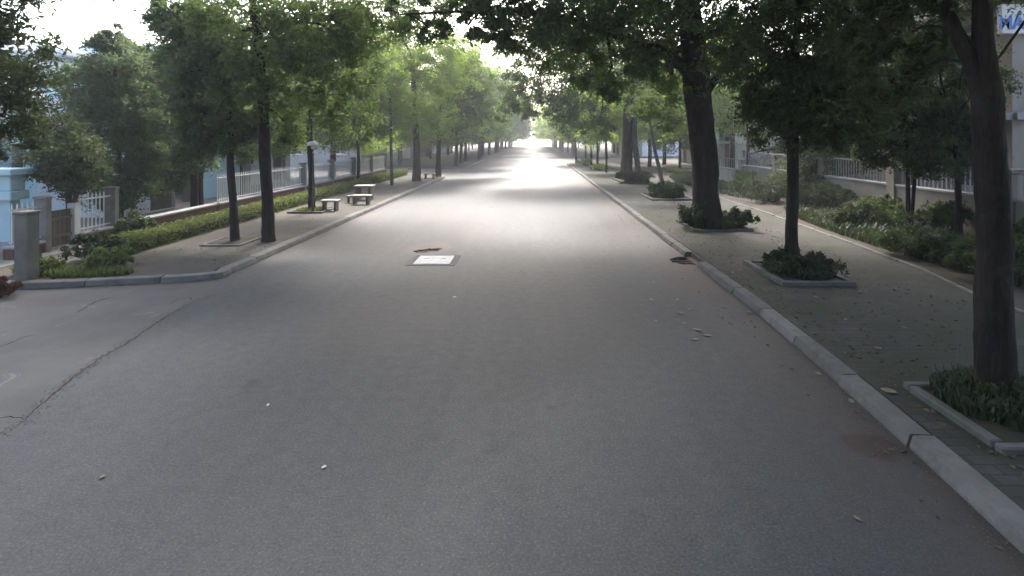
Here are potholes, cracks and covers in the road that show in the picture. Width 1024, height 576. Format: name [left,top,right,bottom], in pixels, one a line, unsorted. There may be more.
drain grate [670,252,708,265]
crack [2,297,193,430]
manhole cover [405,255,461,266]
